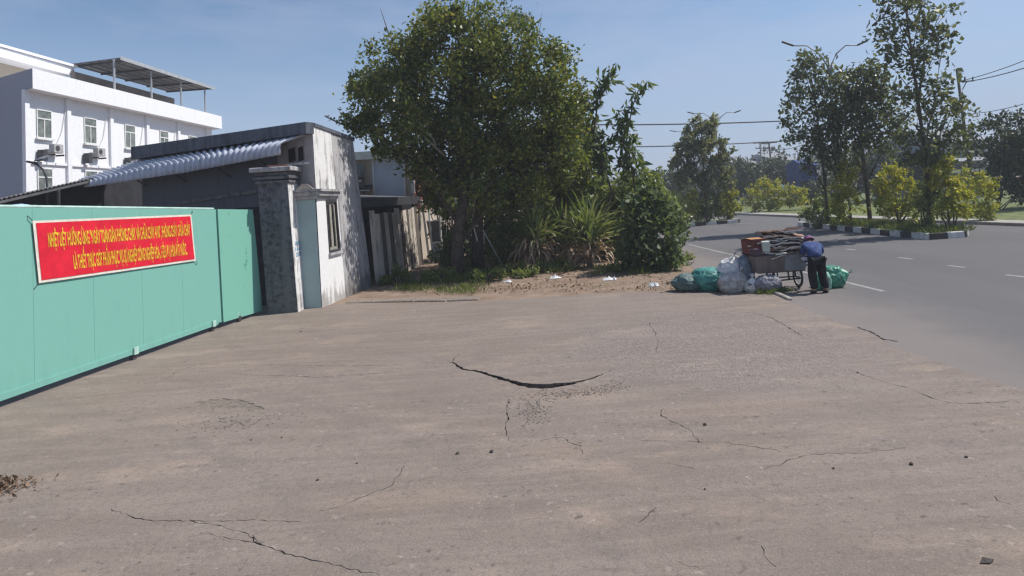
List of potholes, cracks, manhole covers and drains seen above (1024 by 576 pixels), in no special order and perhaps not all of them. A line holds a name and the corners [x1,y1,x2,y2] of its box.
crack [123,354,611,441]
crack [322,467,404,511]
crack [642,409,900,469]
crack [111,509,379,575]
